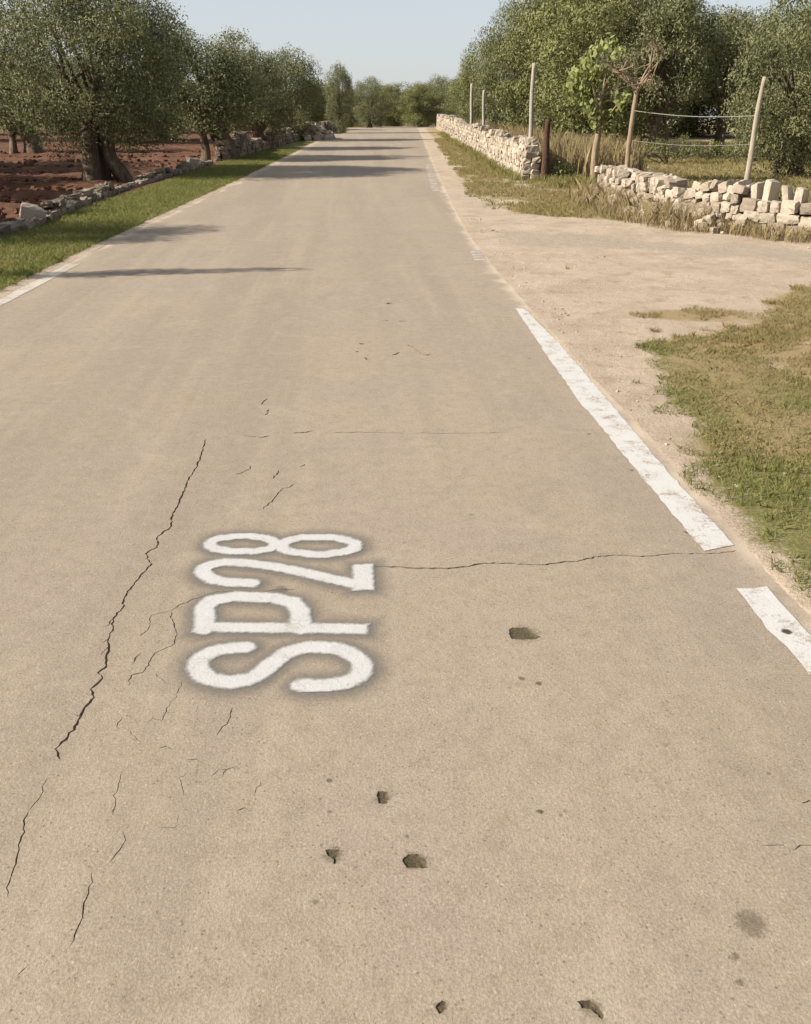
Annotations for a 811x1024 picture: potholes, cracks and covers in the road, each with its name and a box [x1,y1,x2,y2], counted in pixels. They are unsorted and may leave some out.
crack [55,439,293,944]
pothole [325,849,339,864]
crack [356,303,441,360]
crack [376,550,736,569]
pothole [577,1000,604,1020]
crack [237,464,305,509]
pothole [509,627,540,640]
pothole [402,854,427,869]
pothole [376,791,389,804]
